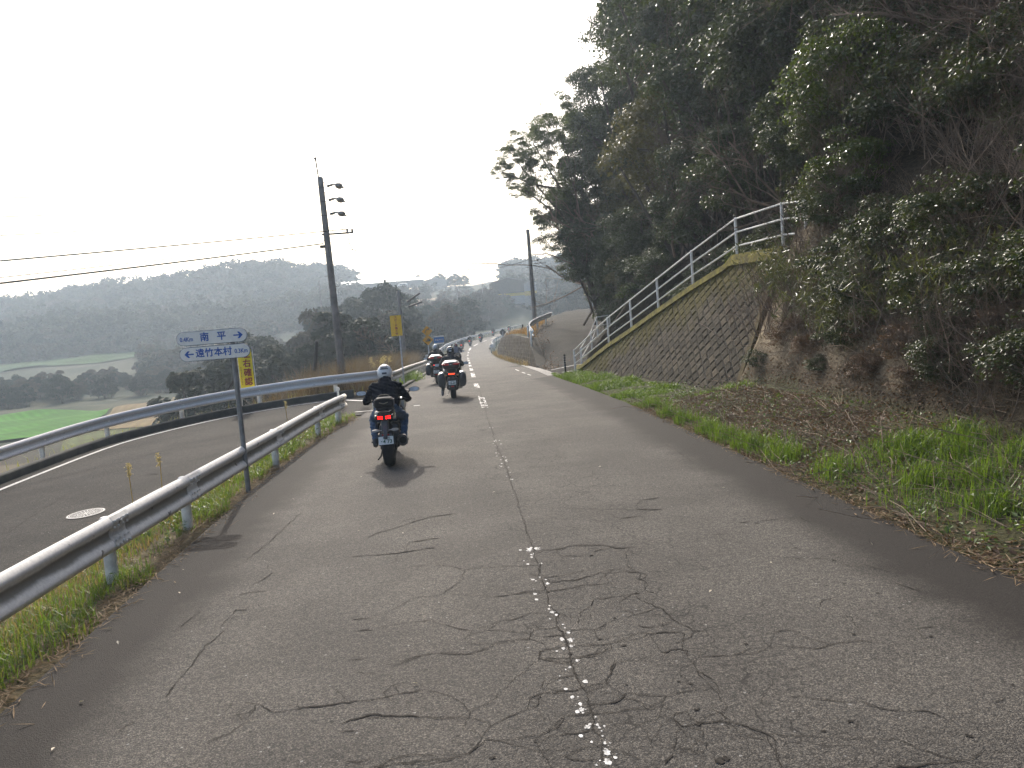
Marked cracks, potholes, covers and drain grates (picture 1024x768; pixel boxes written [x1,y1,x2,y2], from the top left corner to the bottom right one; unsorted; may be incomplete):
crack [165,515,295,697]
crack [208,513,1012,768]
manhole cover [66,508,106,519]
crack [600,497,659,518]
